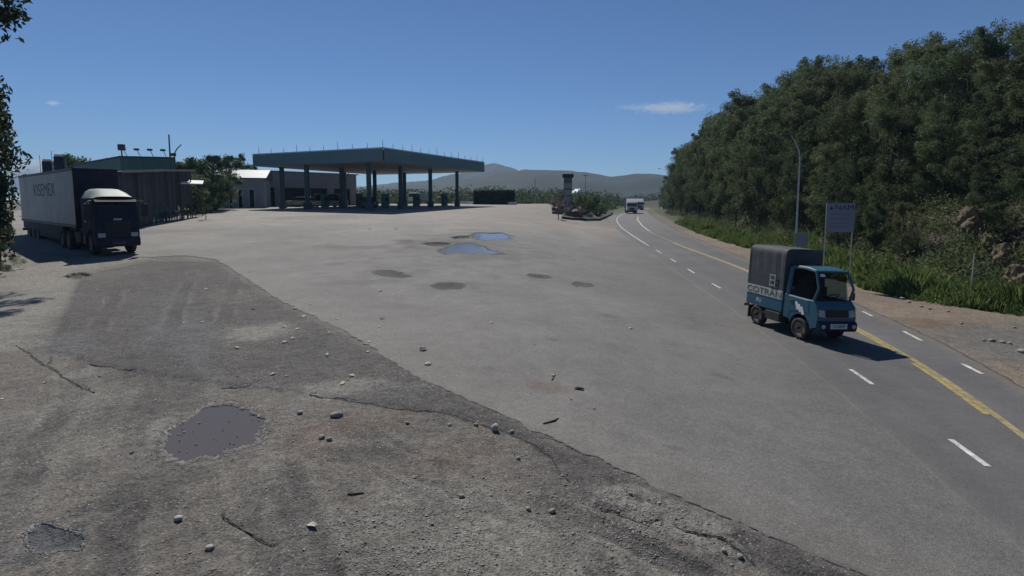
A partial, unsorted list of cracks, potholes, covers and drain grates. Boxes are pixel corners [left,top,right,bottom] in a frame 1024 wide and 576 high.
pothole [63,272,92,280]
pothole [23,522,89,554]
pothole [436,242,507,255]
crack [309,394,571,483]
pothole [469,232,516,241]
pothole [155,401,273,466]
crack [16,345,134,393]
crack [222,511,273,548]
